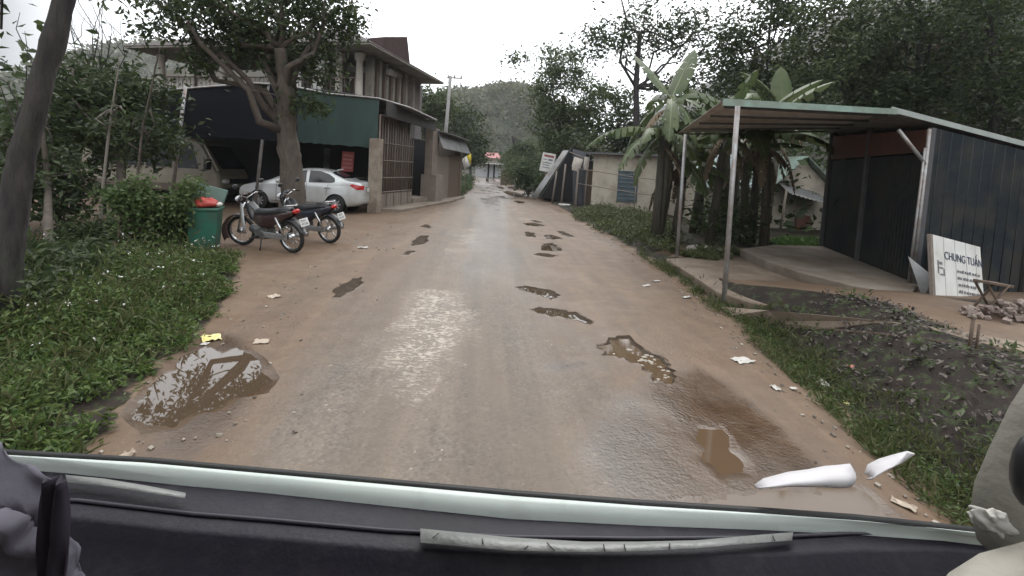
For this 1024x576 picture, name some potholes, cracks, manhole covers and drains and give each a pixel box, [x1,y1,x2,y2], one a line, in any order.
pothole [593,335,679,387]
pothole [540,243,562,252]
pothole [332,277,365,299]
pothole [529,306,595,325]
pothole [516,285,562,300]
pothole [411,235,430,246]
